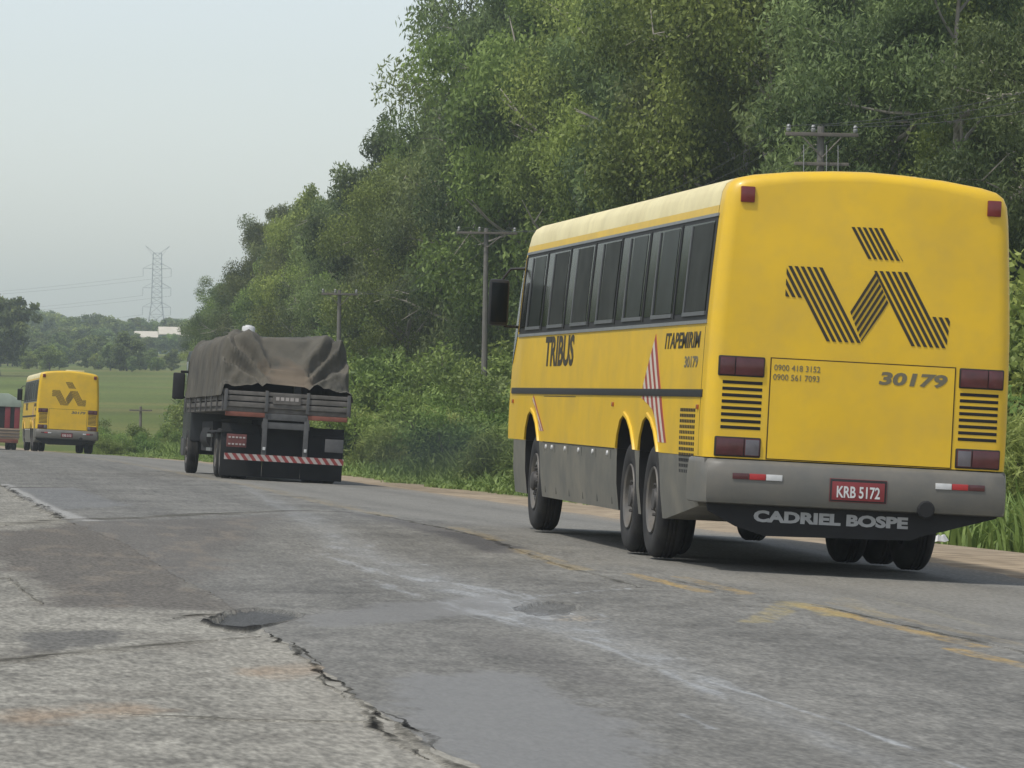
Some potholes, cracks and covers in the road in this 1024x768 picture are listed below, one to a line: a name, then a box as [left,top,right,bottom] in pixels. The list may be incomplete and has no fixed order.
crack [0,634,471,768]
pothole [199,607,306,634]
crack [0,578,44,604]
pothole [512,600,582,616]
